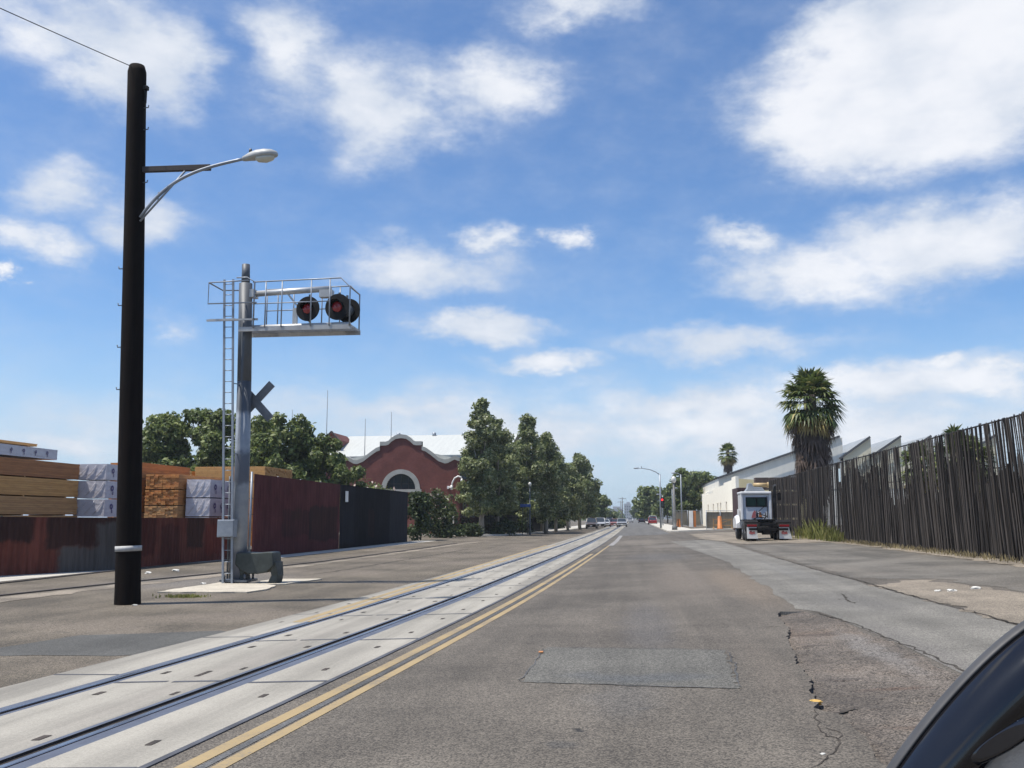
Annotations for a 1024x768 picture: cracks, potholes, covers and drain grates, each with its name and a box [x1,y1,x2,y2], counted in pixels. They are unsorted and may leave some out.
crack [779,558,1019,672]
crack [811,707,860,768]
